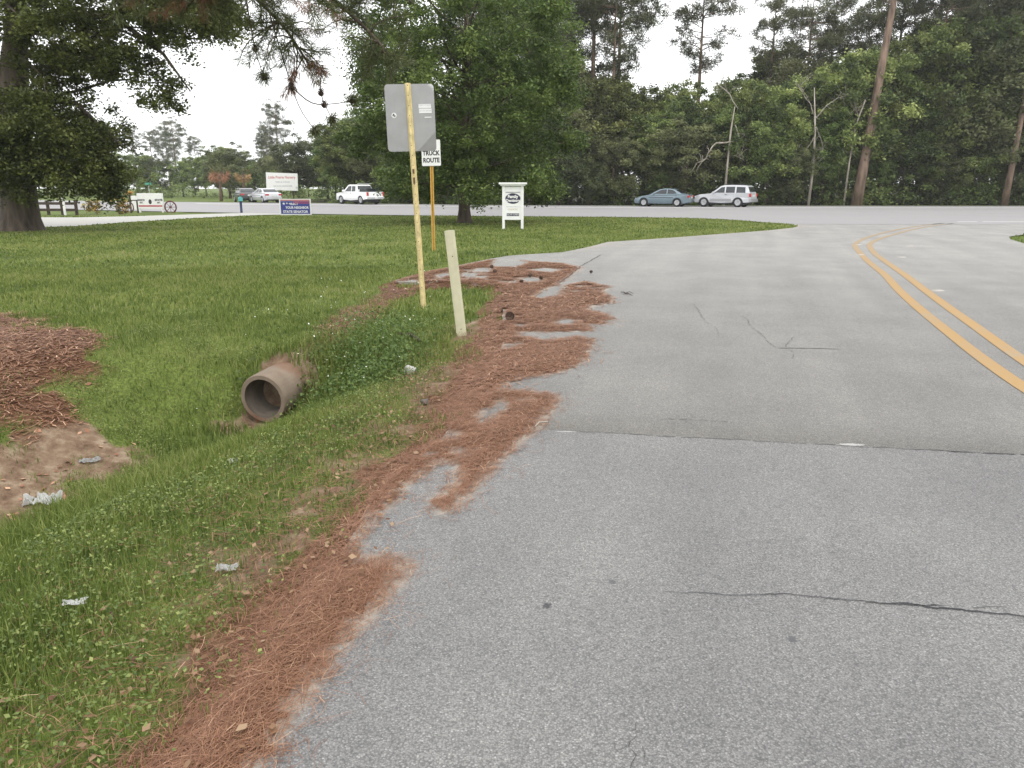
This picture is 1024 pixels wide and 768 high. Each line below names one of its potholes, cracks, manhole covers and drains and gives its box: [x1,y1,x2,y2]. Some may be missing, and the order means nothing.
crack [667,591,1023,616]
